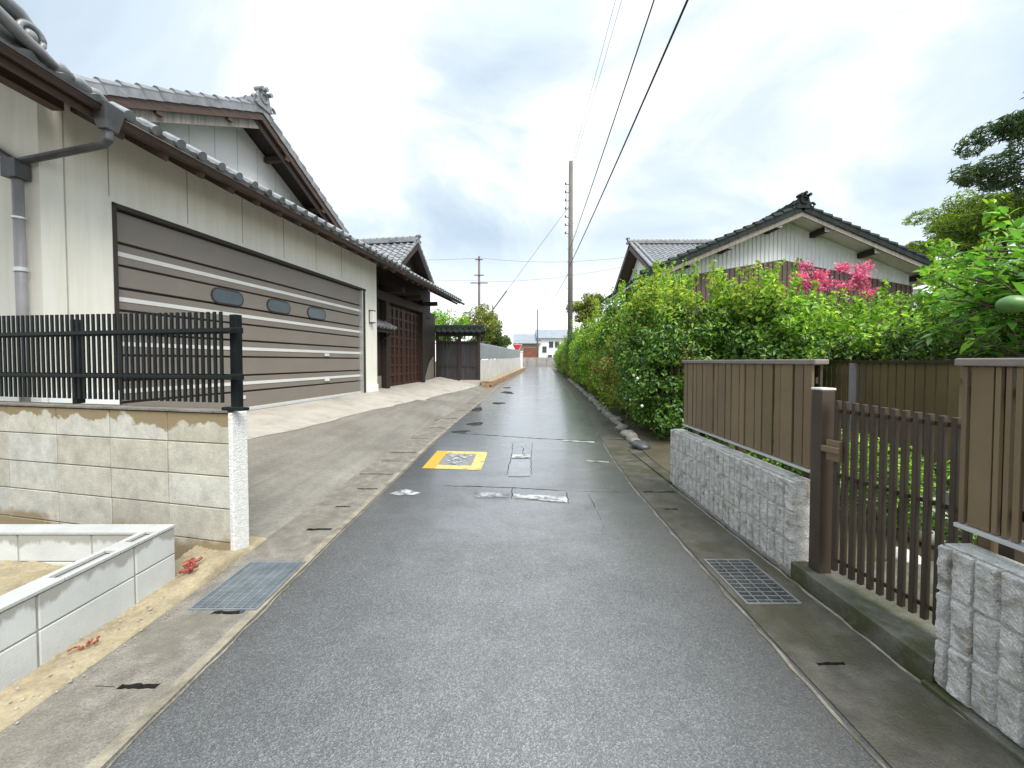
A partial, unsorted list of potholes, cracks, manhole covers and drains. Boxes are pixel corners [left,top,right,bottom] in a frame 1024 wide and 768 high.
drain grate [188,561,306,614]
drain grate [703,559,802,604]
crack [447,433,604,527]
